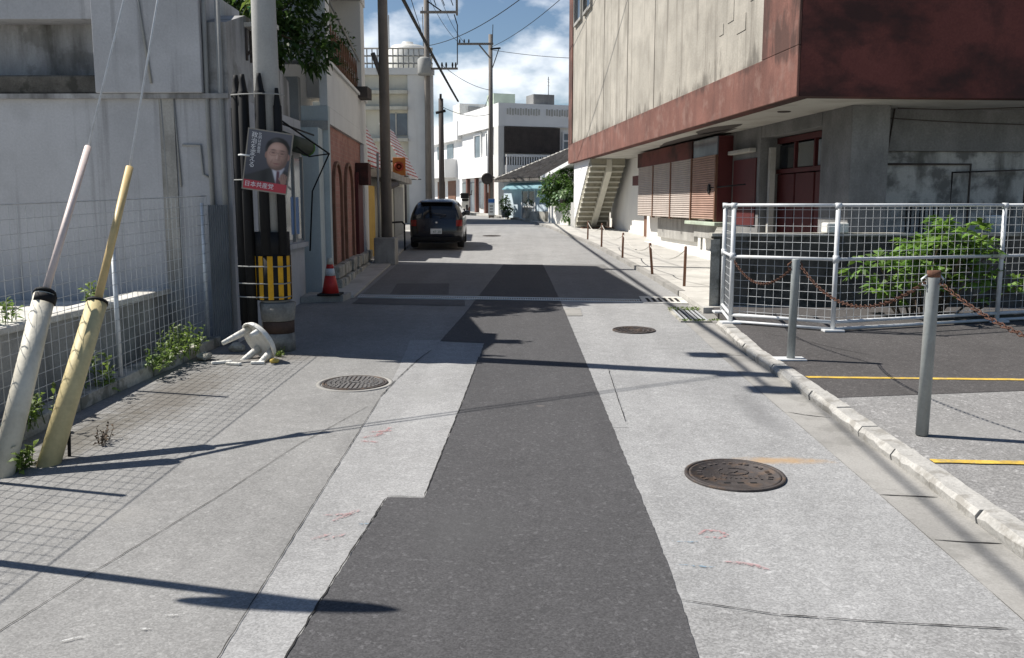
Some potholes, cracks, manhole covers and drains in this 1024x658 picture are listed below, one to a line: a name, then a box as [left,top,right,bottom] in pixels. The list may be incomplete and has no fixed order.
drain grate [668,308,712,323]
manhole cover [316,375,393,392]
manhole cover [612,326,656,334]
manhole cover [684,458,786,492]
